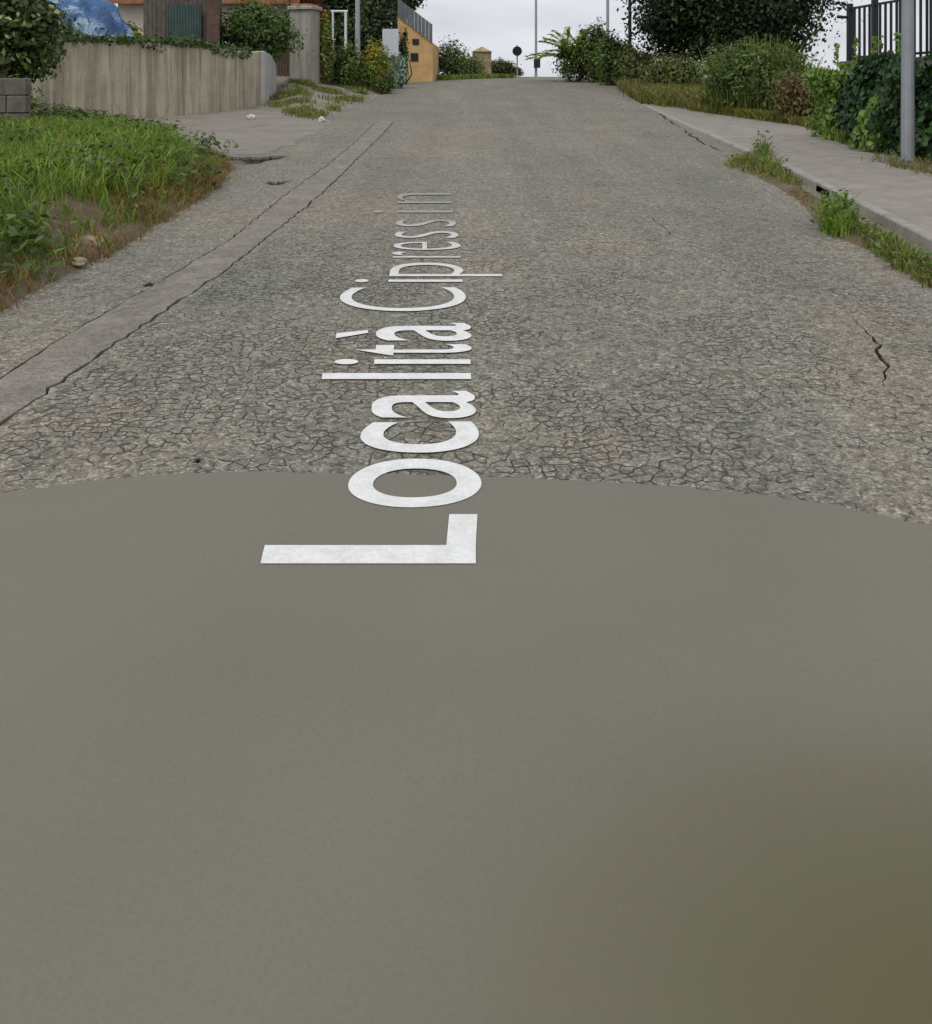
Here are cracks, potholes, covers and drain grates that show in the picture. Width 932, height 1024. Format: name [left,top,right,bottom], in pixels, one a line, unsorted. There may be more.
drain grate [816,182,839,197]
crack [659,114,717,150]
crack [852,317,890,388]
